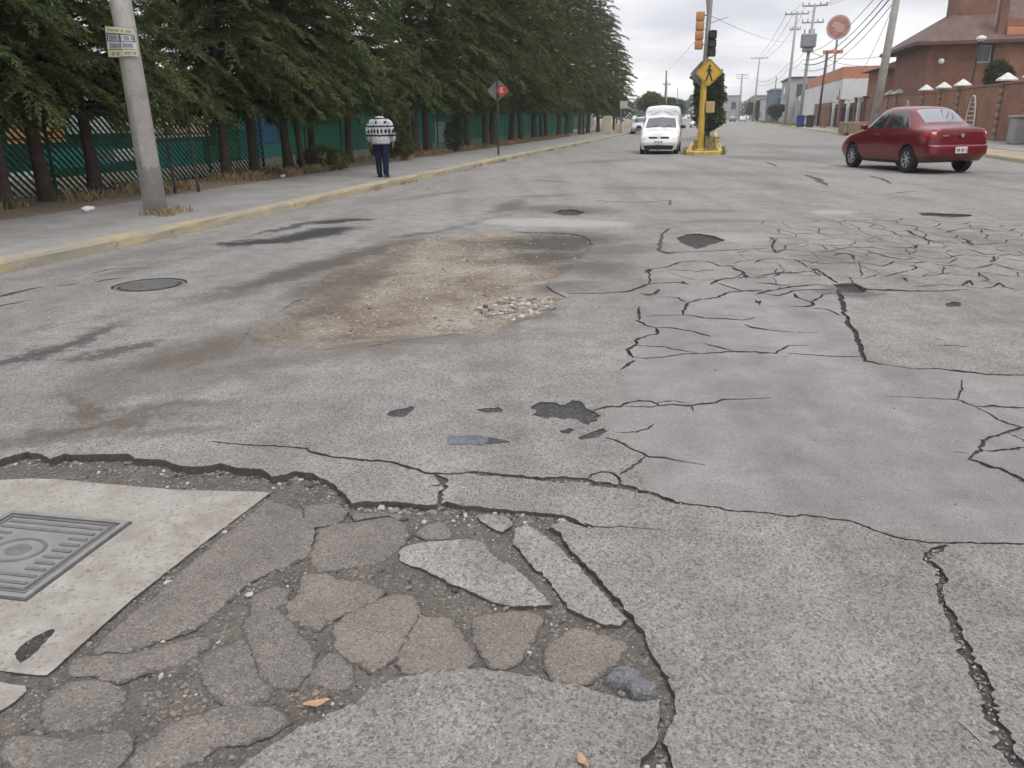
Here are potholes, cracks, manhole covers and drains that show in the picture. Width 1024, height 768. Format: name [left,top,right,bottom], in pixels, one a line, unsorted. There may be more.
crack [211,379,1024,768]
pothole [387,406,414,417]
crack [568,218,1024,370]
pothole [832,283,868,294]
pothole [677,234,725,249]
pothole [0,452,676,768]
pothole [530,400,601,425]
manhole cover [111,278,187,292]
